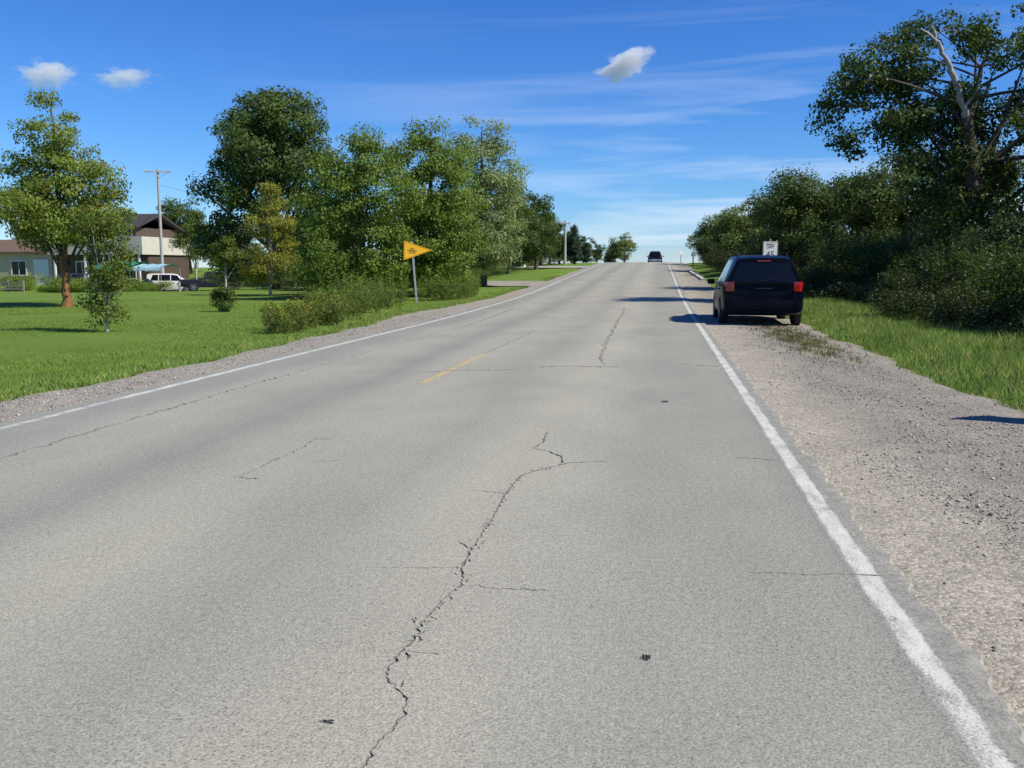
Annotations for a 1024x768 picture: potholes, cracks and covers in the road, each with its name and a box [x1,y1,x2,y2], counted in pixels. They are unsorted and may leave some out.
crack [549,307,625,367]
crack [361,432,600,768]
crack [234,439,332,479]
